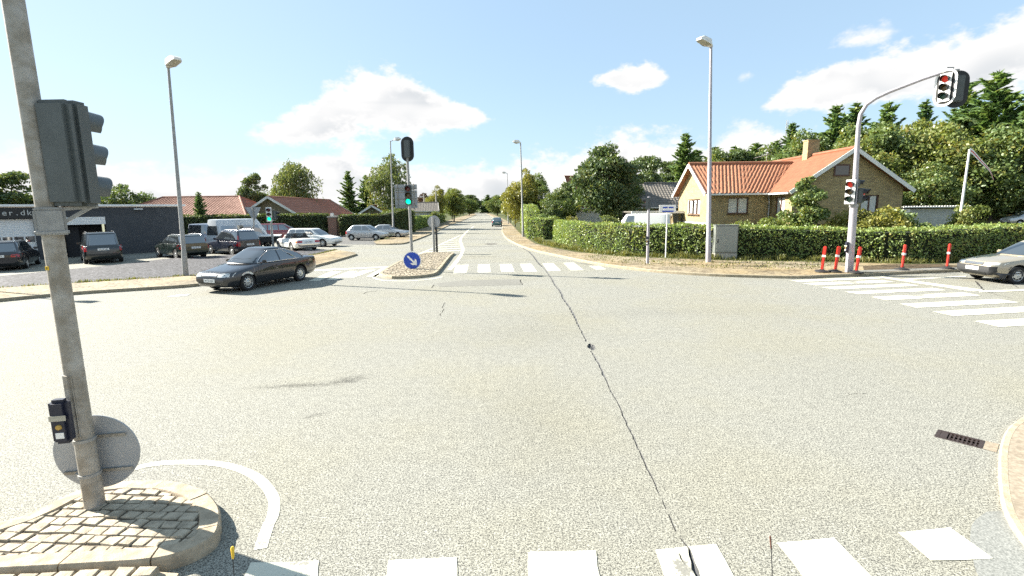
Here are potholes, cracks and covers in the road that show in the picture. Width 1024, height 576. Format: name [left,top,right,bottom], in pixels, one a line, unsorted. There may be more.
drain grate [934,429,985,449]
